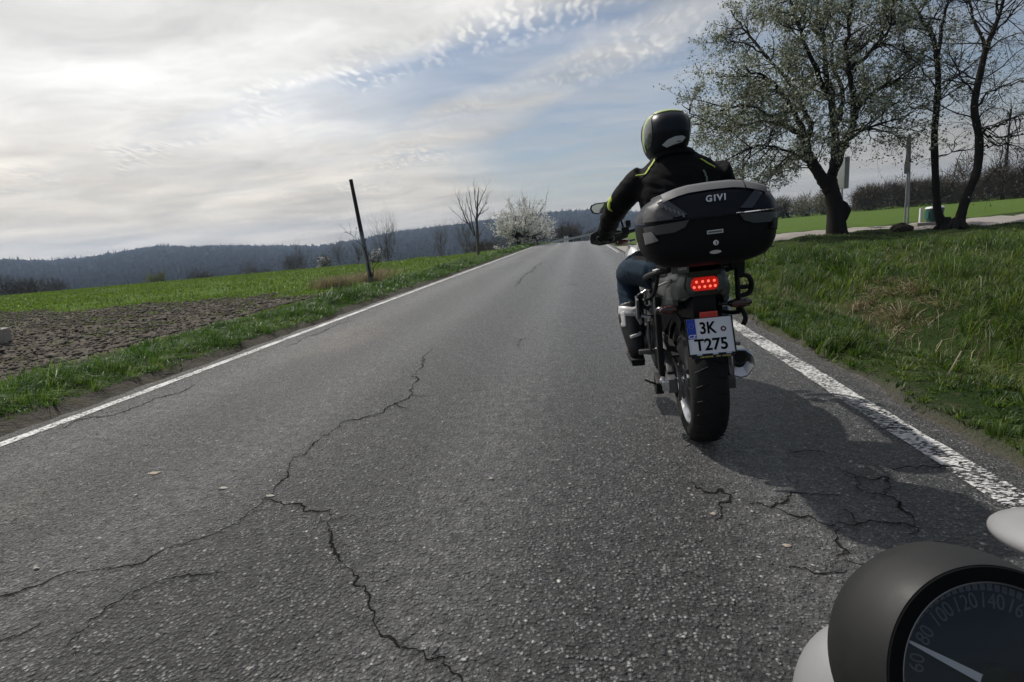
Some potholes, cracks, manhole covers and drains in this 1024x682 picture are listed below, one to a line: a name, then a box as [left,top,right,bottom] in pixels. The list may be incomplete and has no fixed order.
crack [0,348,462,682]
crack [693,450,967,574]
